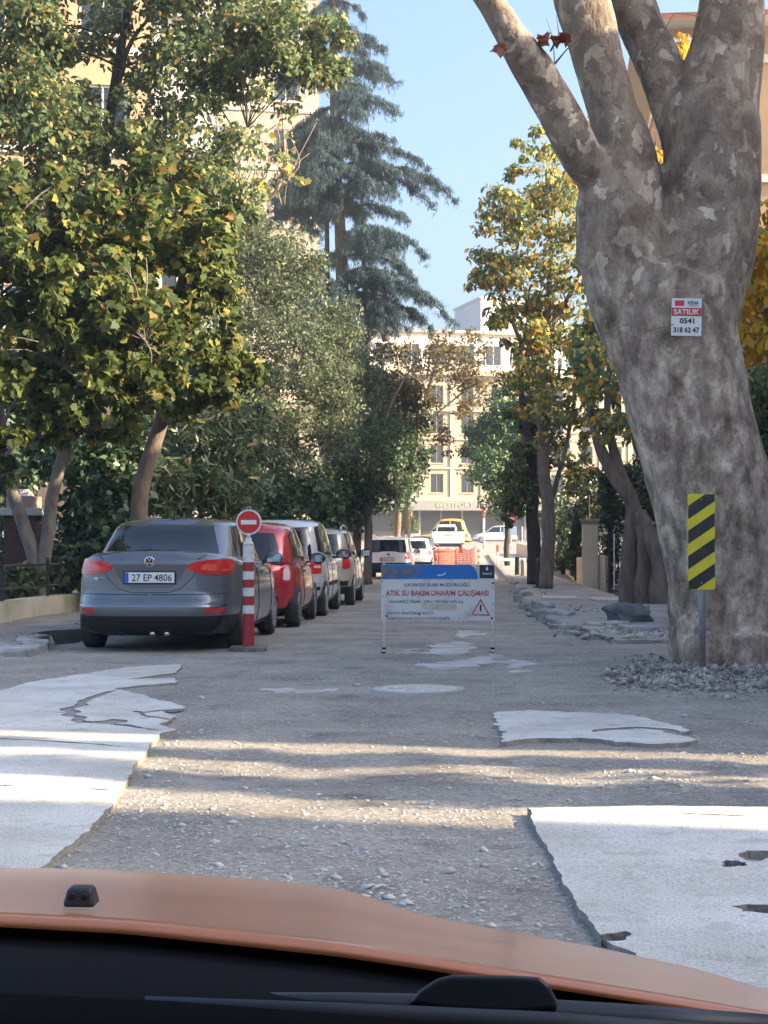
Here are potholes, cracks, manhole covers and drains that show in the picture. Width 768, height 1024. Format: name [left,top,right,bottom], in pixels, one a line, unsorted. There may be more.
pothole [601,932,631,948]
crack [61,692,184,728]
pothole [738,851,768,860]
pothole [736,905,768,913]
manhole cover [373,684,465,696]
